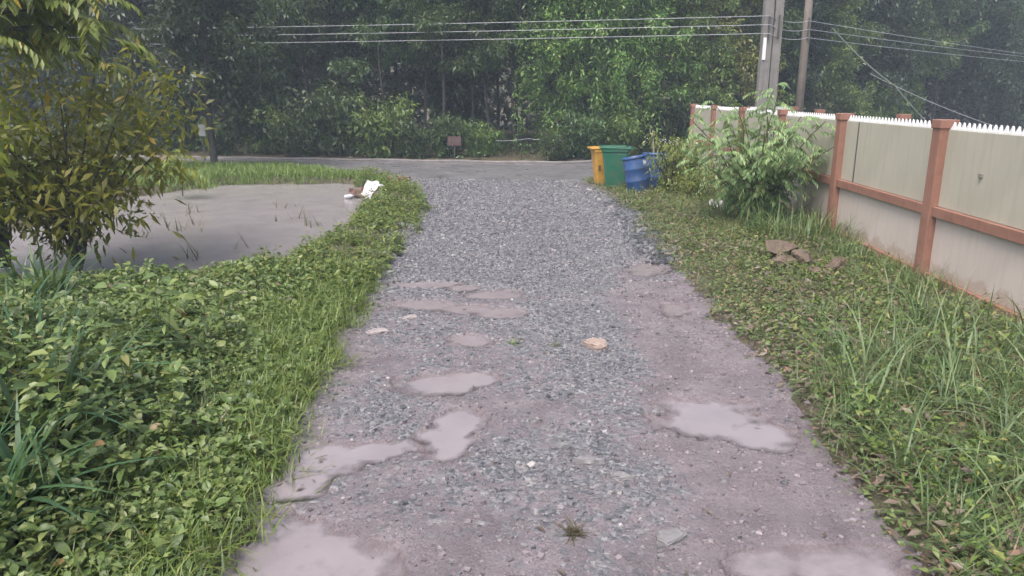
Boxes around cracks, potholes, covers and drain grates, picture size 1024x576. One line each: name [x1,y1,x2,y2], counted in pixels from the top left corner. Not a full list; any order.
pothole [656,302,696,319]
pothole [259,437,404,514]
pothole [620,262,671,278]
pothole [396,404,493,463]
pothole [215,507,413,576]
pothole [634,392,806,455]
pothole [441,333,503,347]
pothole [381,299,541,319]
pothole [716,538,922,576]
pothole [382,280,528,300]
pothole [368,369,505,397]
